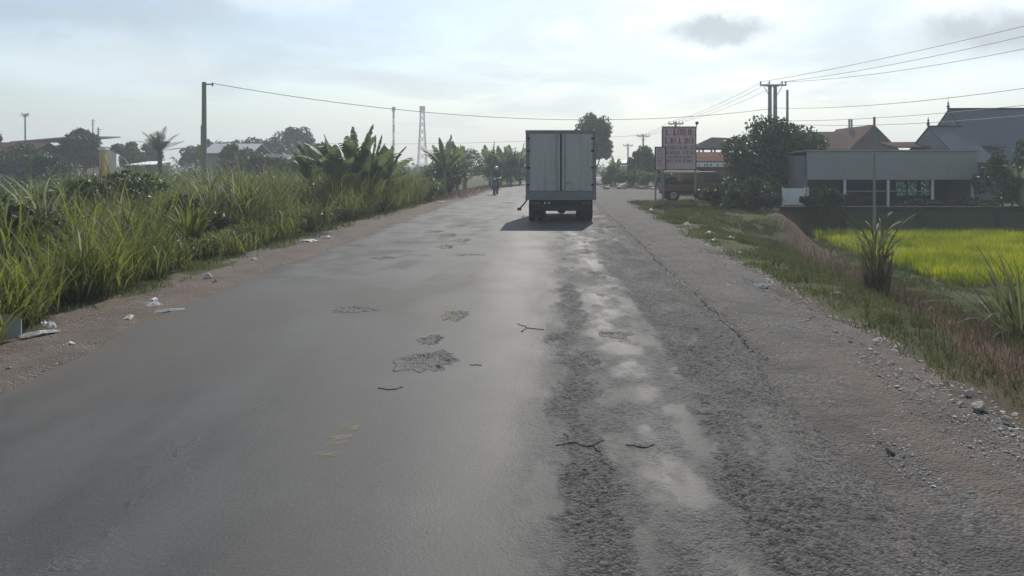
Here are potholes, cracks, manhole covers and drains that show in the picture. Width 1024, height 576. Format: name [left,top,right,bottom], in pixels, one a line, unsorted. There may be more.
pothole [441,310,469,322]
pothole [416,334,443,345]
crack [556,433,605,452]
pothole [392,349,460,373]
crack [600,211,768,358]
